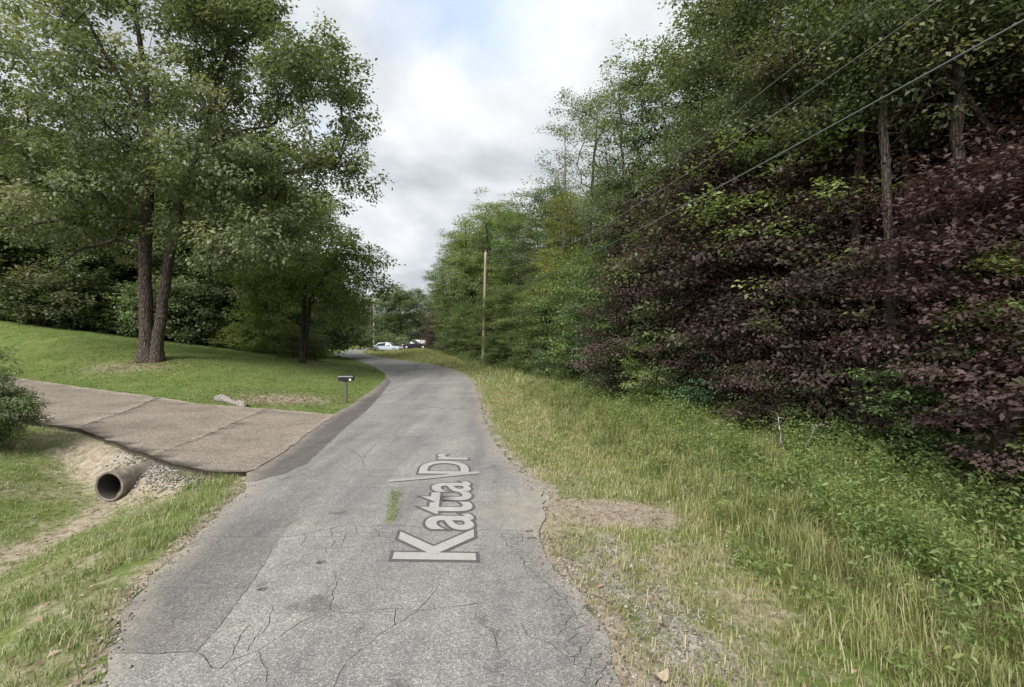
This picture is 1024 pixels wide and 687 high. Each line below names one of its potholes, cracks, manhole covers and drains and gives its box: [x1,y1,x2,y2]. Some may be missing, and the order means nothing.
crack [234,525,607,685]
crack [118,573,478,686]
